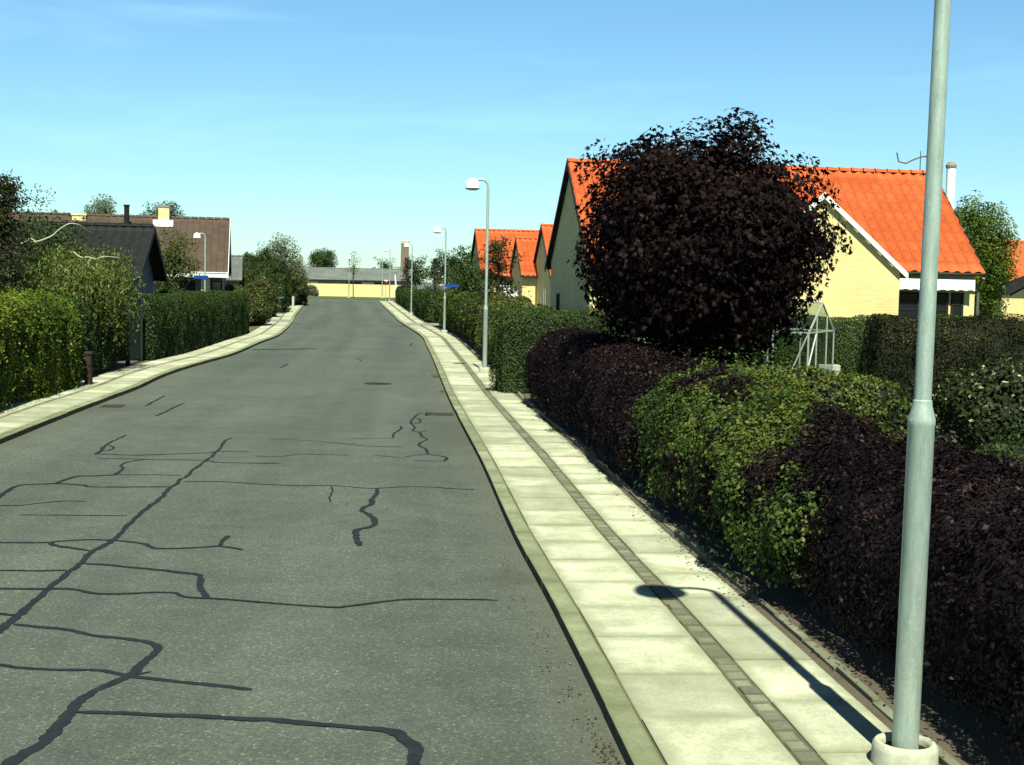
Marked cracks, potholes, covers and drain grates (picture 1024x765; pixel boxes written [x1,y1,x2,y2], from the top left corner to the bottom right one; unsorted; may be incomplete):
crack [184,481,474,545]
crack [0,501,127,516]
crack [282,426,403,456]
